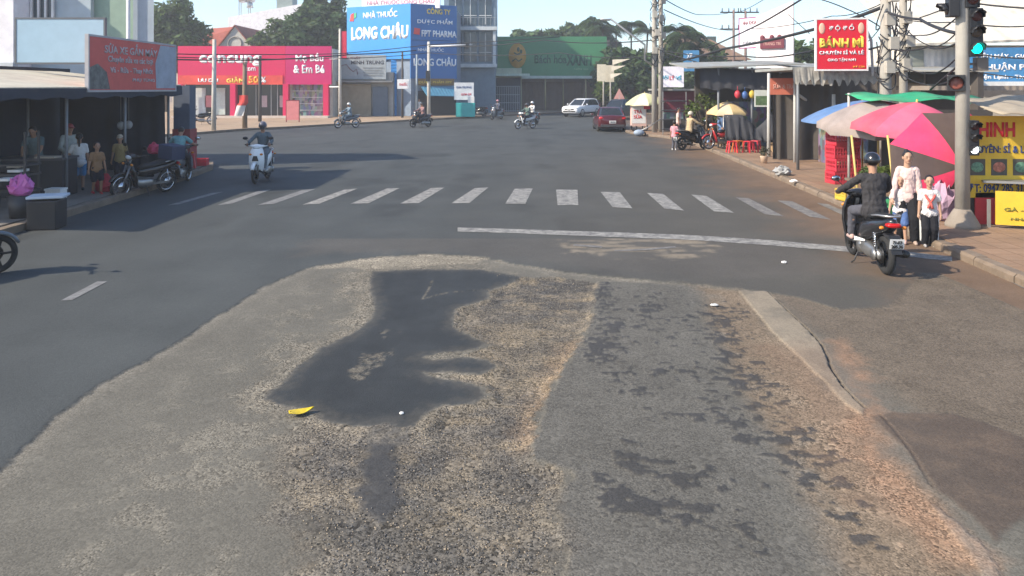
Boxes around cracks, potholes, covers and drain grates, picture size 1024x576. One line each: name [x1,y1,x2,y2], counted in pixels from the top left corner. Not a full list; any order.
crack [767,291,936,488]
